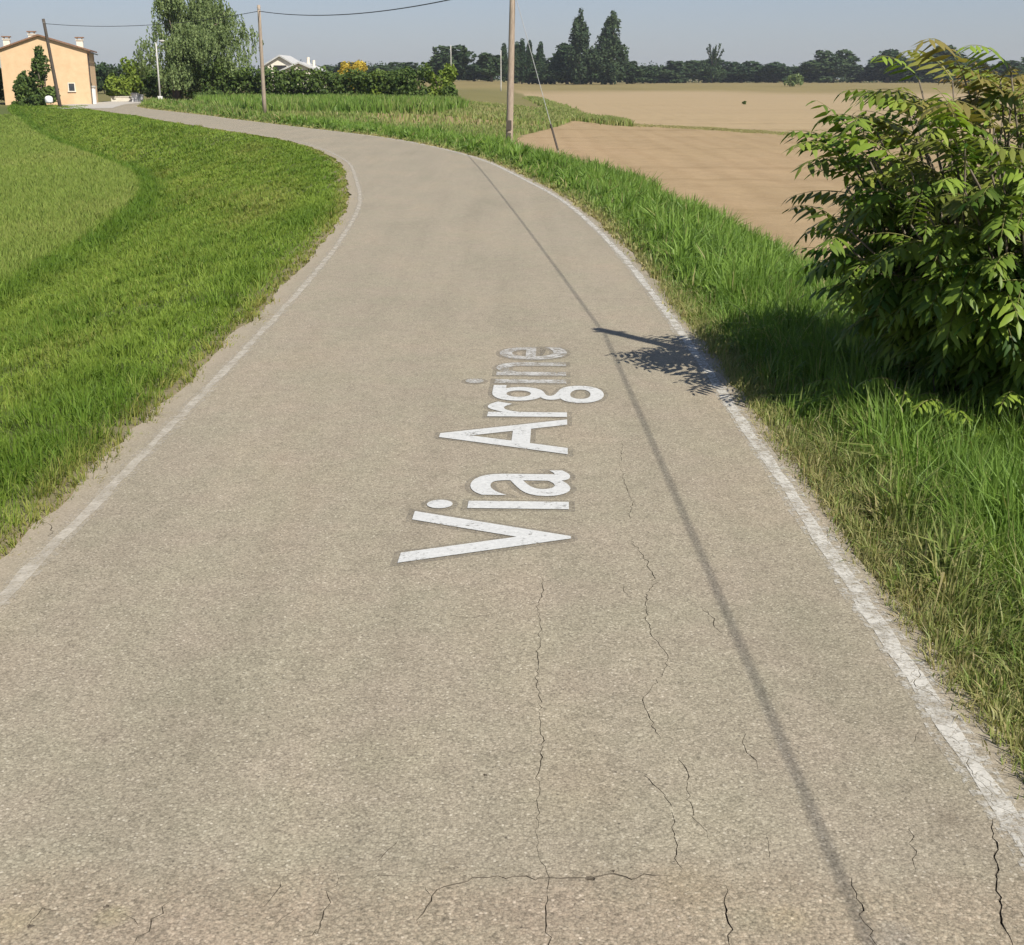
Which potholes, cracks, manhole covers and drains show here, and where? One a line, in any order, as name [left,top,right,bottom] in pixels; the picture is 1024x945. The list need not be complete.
crack [374,579,708,945]
crack [623,543,668,736]
crack [302,874,339,937]
crack [841,869,876,944]
crack [121,901,170,943]
crack [991,820,1013,945]
